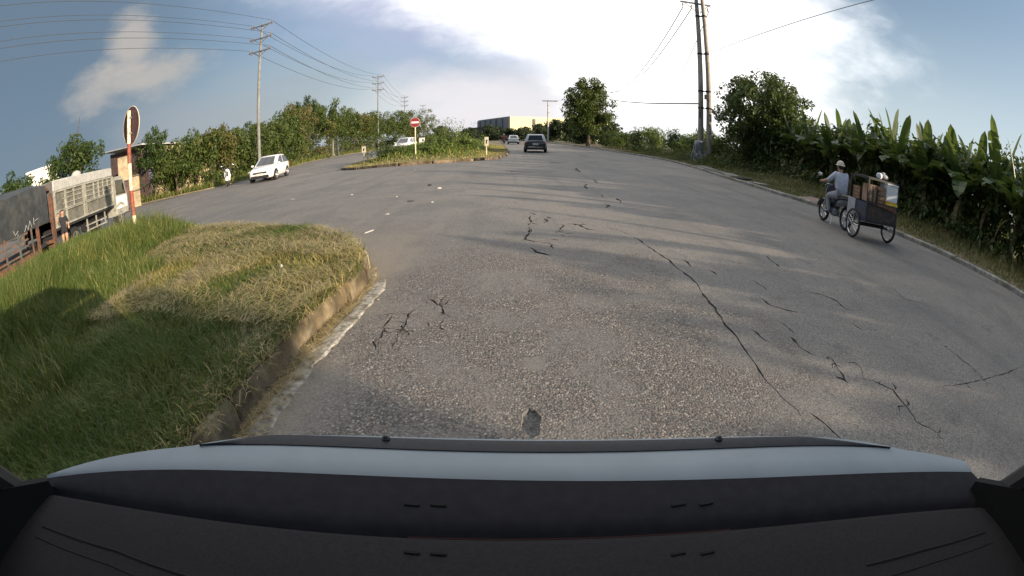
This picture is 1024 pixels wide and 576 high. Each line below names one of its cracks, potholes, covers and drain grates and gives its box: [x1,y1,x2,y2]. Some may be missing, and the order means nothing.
crack [609,227,943,439]
crack [365,294,456,350]
crack [524,212,594,255]
pothole [521,408,541,438]
crack [943,346,1017,388]
crack [511,162,621,208]
